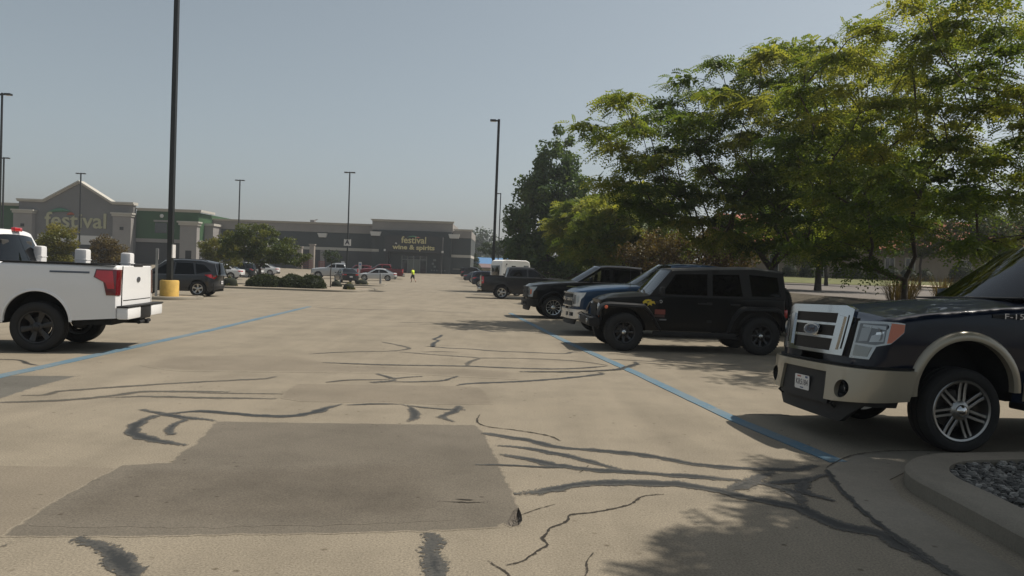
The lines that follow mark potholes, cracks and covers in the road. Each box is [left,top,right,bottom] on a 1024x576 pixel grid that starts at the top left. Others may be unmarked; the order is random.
pothole [506,508,522,527]
crack [476,415,560,441]
crack [488,494,664,576]
